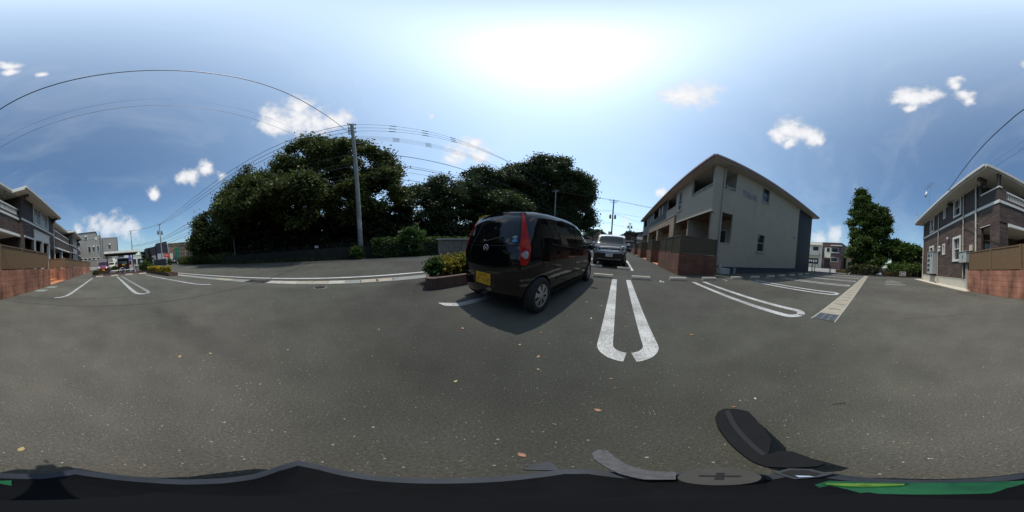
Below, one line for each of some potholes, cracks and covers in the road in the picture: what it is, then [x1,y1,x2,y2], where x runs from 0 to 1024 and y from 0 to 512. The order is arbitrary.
drain grate [813,312,839,321]
